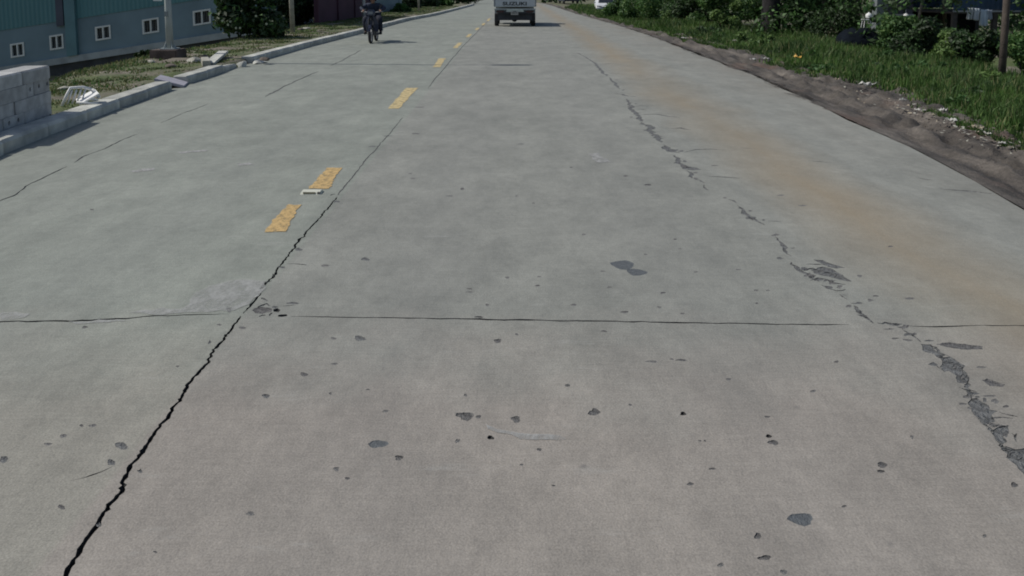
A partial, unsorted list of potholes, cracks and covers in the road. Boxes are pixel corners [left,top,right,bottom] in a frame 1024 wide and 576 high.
crack [63,119,401,576]
crack [578,53,733,190]
pothole [456,412,474,421]
crack [728,199,851,300]
crack [0,135,134,201]
pothole [787,513,813,526]
pothole [368,440,389,448]
crack [879,322,1024,474]
